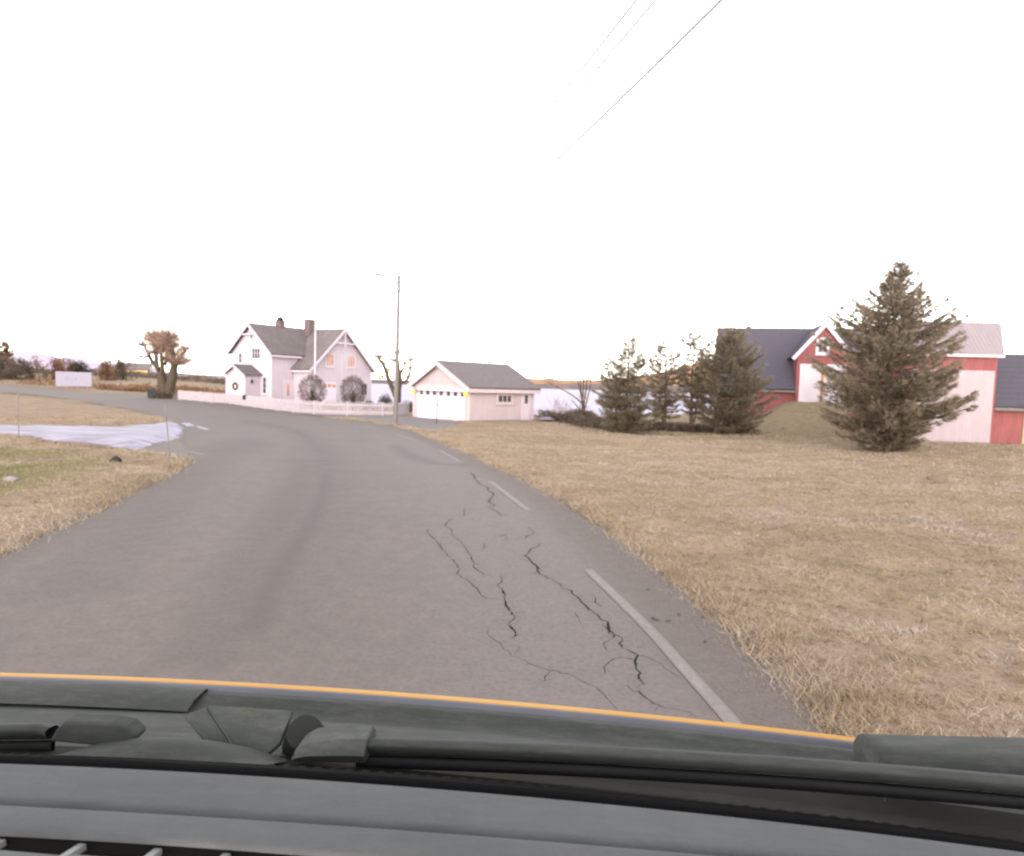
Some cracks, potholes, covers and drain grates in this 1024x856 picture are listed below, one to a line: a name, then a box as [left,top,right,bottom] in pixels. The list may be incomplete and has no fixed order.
crack [427,508,697,717]
